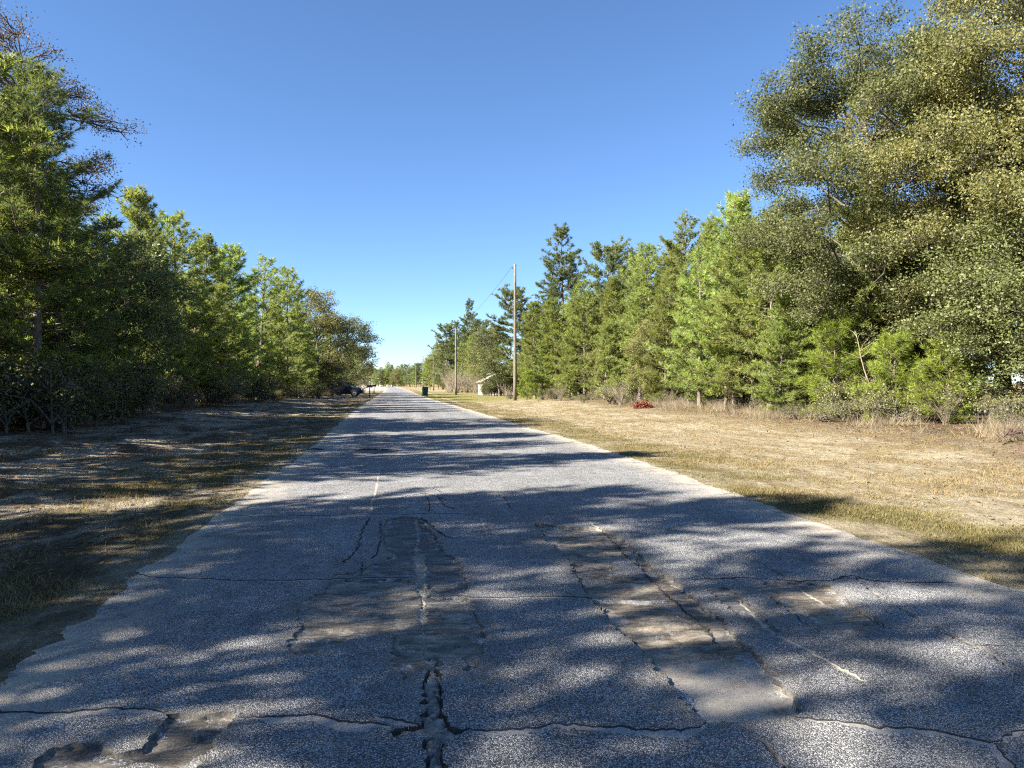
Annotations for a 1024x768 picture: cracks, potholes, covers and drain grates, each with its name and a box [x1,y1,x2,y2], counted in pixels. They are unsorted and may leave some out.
crack [0,448,1024,768]
